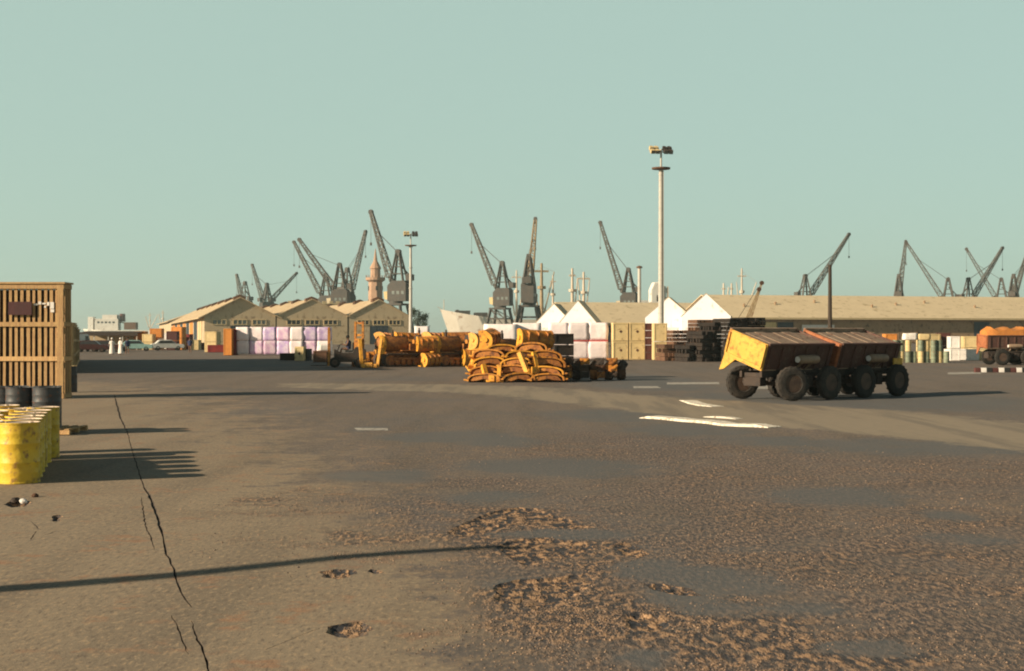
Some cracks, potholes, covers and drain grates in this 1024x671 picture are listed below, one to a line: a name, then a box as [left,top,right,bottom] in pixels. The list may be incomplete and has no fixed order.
pothole [612,541,651,559]
pothole [493,574,596,610]
pothole [497,537,596,566]
crack [114,395,209,671]
pothole [326,621,374,638]
pothole [644,584,703,596]
pothole [447,507,591,538]
pothole [622,611,670,633]
pothole [319,569,357,579]
